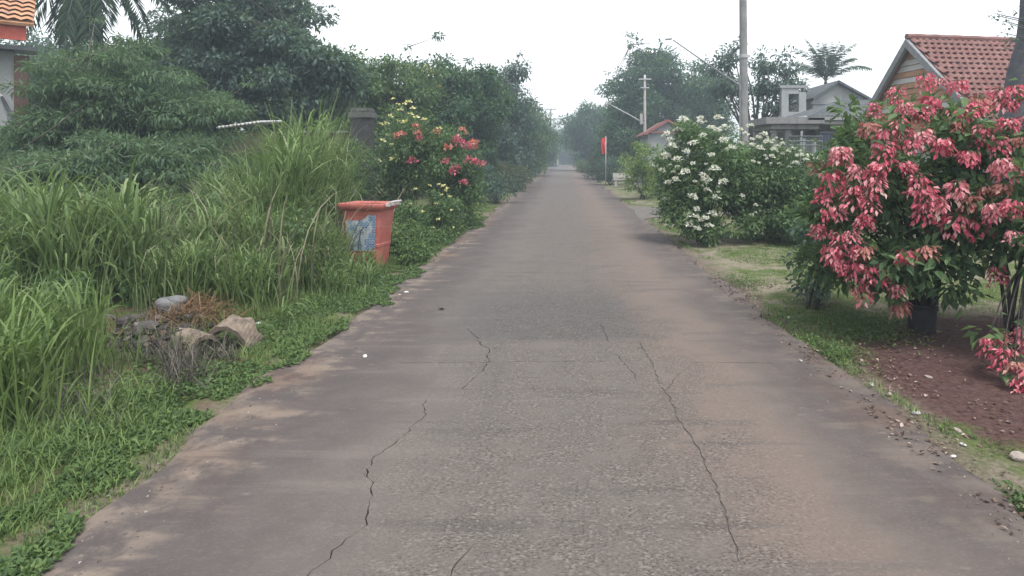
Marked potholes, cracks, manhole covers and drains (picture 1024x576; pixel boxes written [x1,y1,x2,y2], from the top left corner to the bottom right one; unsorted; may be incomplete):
crack [330,405,425,559]
crack [619,344,739,561]
